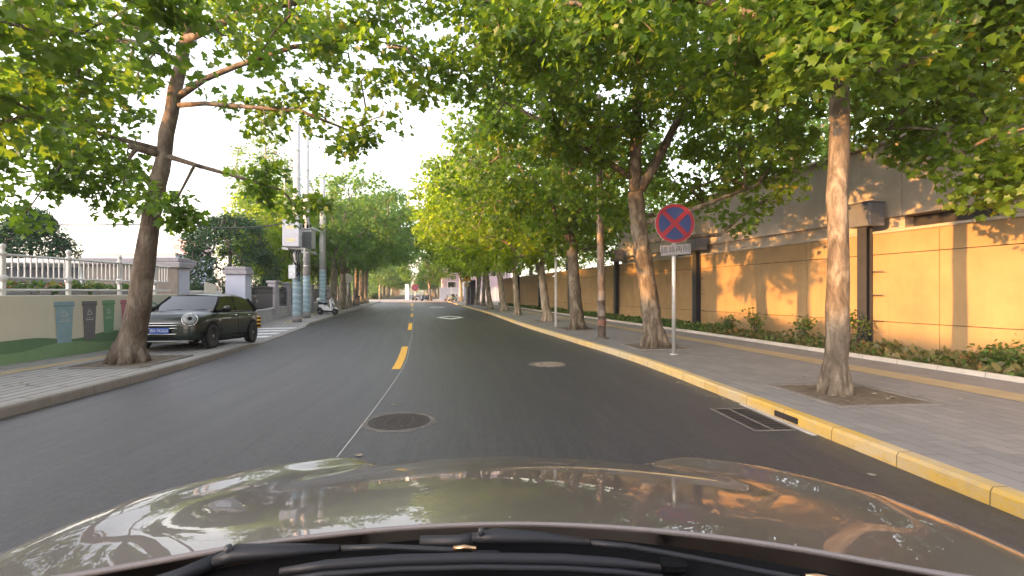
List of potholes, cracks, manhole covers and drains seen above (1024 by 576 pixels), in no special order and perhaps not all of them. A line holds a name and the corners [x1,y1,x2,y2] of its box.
manhole cover [360,412,436,433]
drain grate [774,410,798,424]
